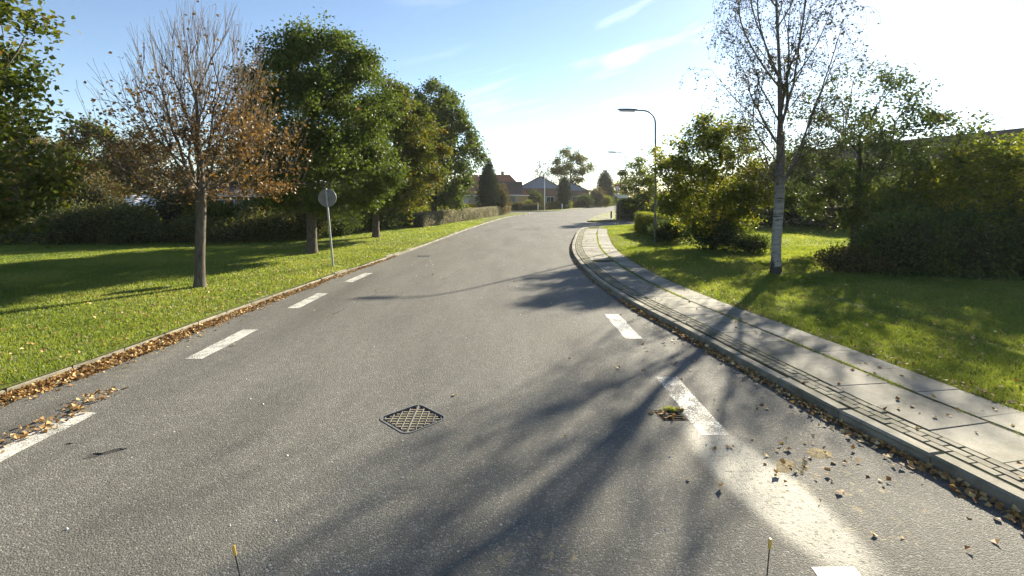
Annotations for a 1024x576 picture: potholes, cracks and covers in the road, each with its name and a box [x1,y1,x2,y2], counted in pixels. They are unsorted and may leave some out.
drain grate [653,410,688,422]
